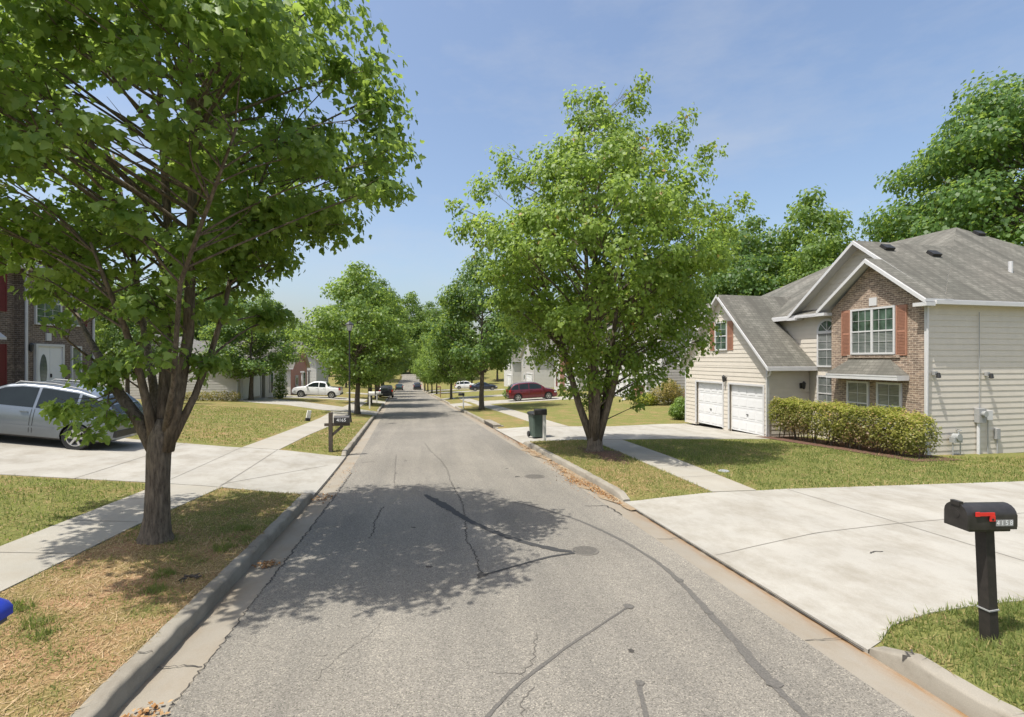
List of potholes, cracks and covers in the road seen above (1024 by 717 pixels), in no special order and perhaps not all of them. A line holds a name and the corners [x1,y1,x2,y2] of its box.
manhole cover [571,546,599,556]
crack [494,632,538,717]
crack [426,445,482,572]
